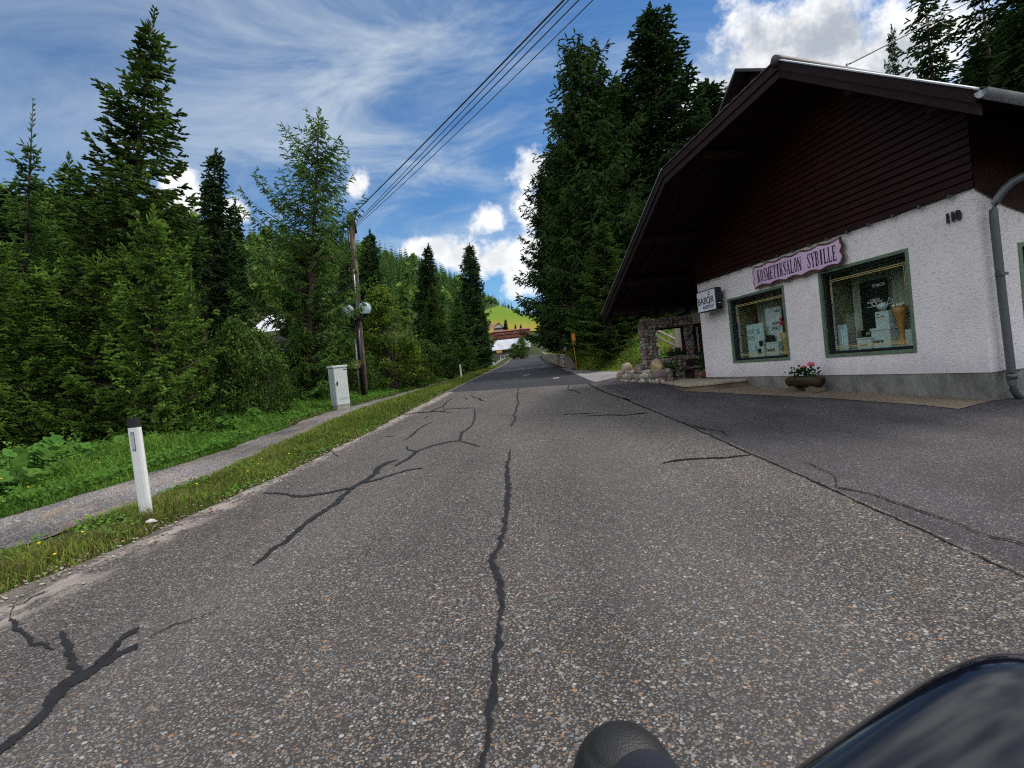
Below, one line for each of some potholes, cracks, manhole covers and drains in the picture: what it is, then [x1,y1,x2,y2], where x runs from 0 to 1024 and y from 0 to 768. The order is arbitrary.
crack [663,454,750,463]
crack [803,461,1023,544]
crack [404,395,483,418]
